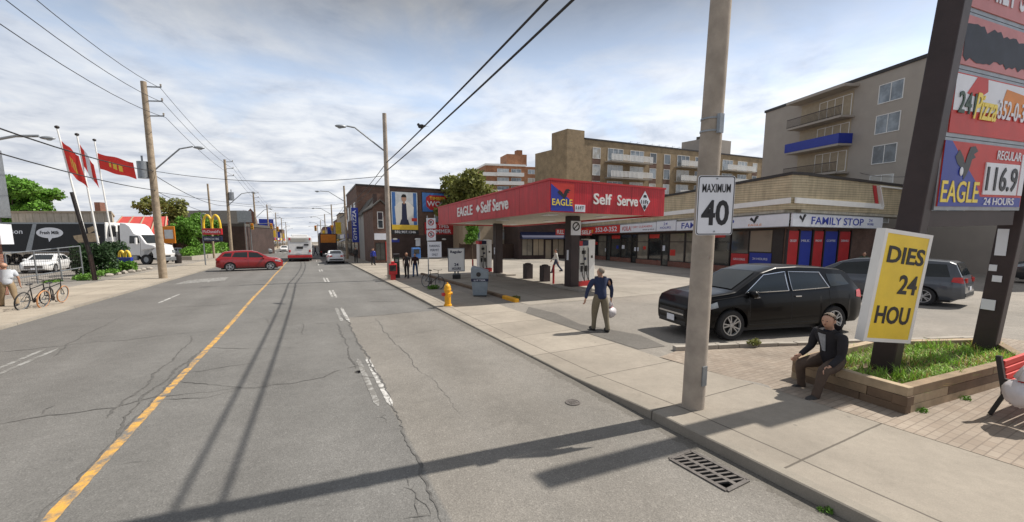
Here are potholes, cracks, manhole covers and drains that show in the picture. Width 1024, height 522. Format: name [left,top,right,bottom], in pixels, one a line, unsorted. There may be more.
drain grate [668,449,750,492]
crack [370,301,454,408]
crack [2,322,374,437]
crack [406,480,431,518]
